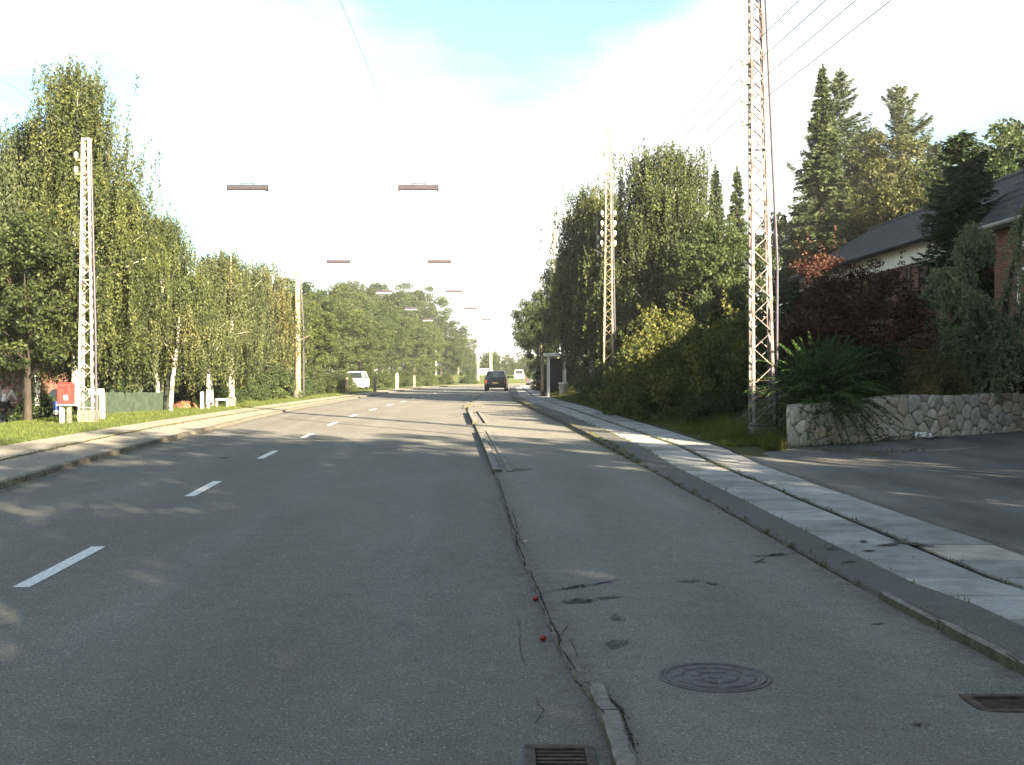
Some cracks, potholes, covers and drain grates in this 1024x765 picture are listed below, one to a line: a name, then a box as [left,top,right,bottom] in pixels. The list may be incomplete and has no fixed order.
drain grate [958,694,1024,713]
crack [609,695,639,753]
crack [498,479,579,672]
drain grate [525,744,598,765]
manhole cover [658,662,772,693]
